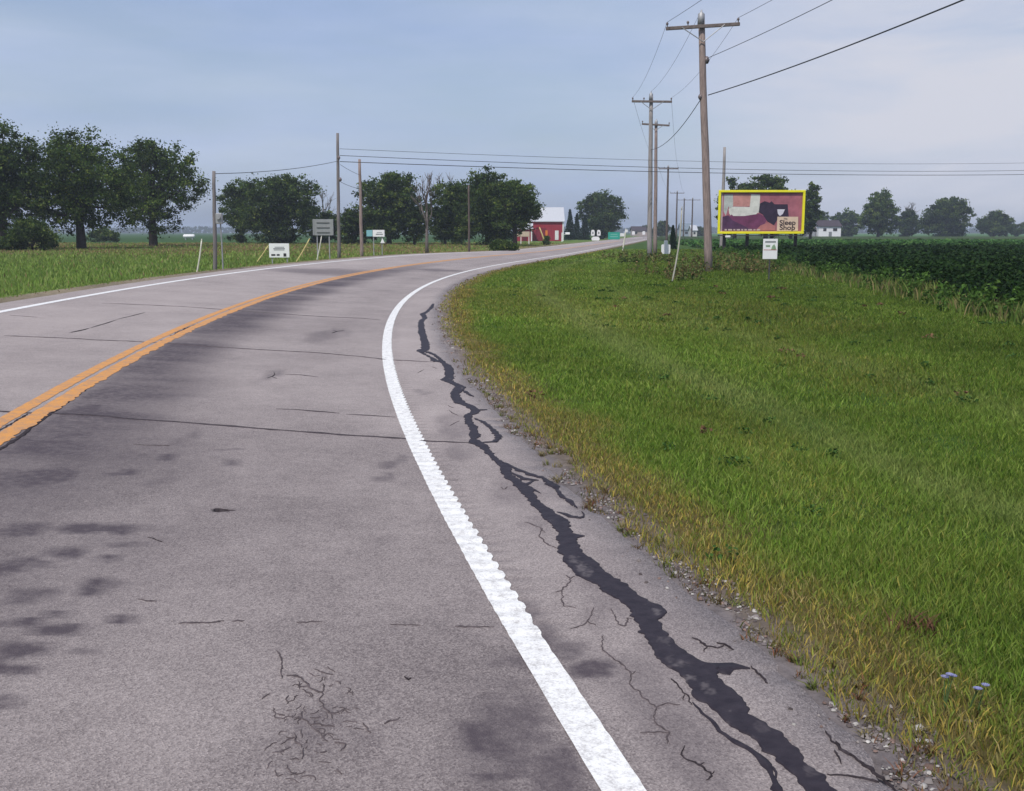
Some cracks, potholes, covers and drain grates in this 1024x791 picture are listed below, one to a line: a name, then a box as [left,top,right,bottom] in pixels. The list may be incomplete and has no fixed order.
crack [556,575,734,780]
crack [526,522,556,548]
crack [178,620,494,628]
crack [262,650,400,783]
crack [284,409,391,417]
